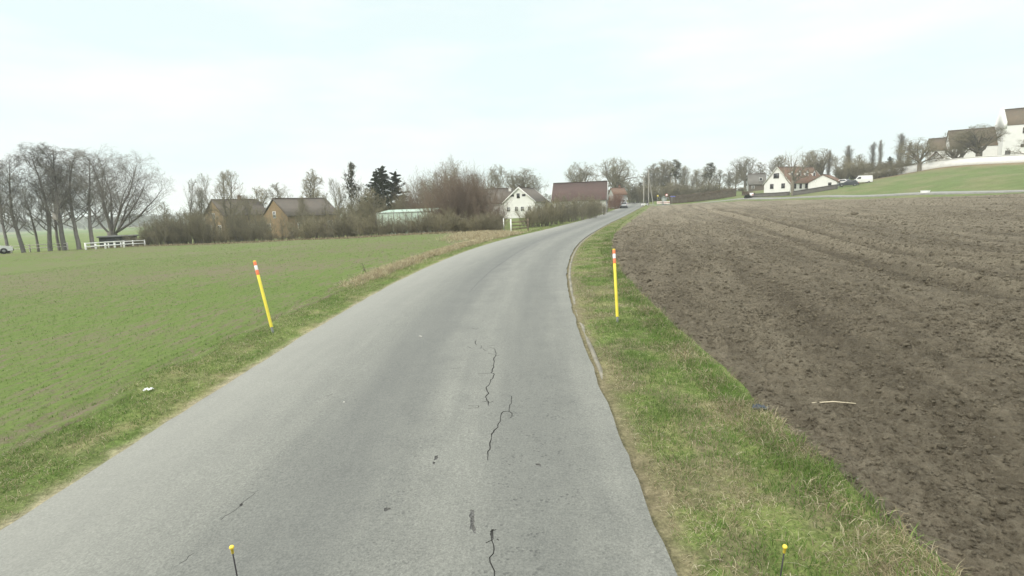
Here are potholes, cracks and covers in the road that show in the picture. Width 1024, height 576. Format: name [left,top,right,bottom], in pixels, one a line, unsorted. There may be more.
crack [468,328,512,460]
crack [486,529,499,576]
